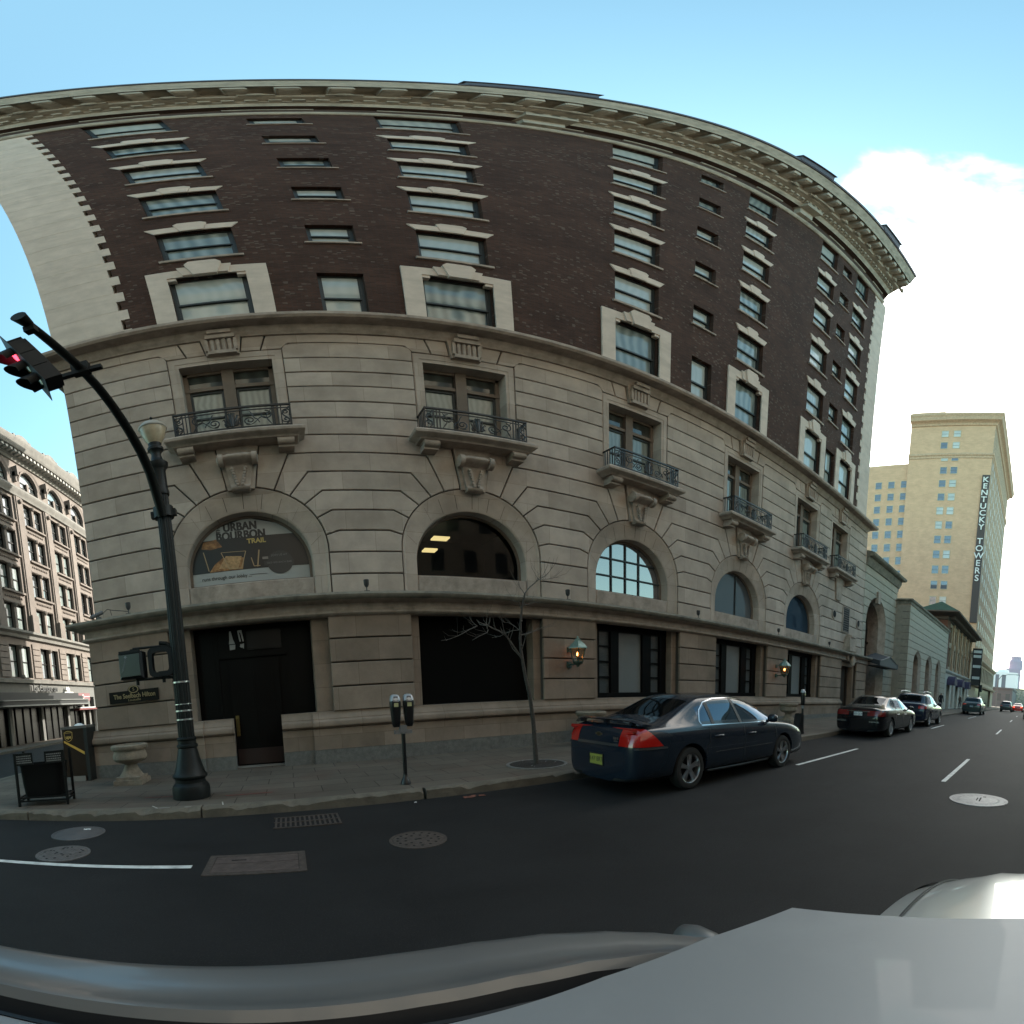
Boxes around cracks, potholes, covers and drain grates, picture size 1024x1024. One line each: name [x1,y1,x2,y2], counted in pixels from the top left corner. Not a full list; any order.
utility cover [201,850,307,876]
drain grate [273,813,342,830]
manhole cover [35,846,91,862]
manhole cover [389,831,447,849]
manhole cover [51,826,105,841]
manhole cover [949,793,1008,807]
